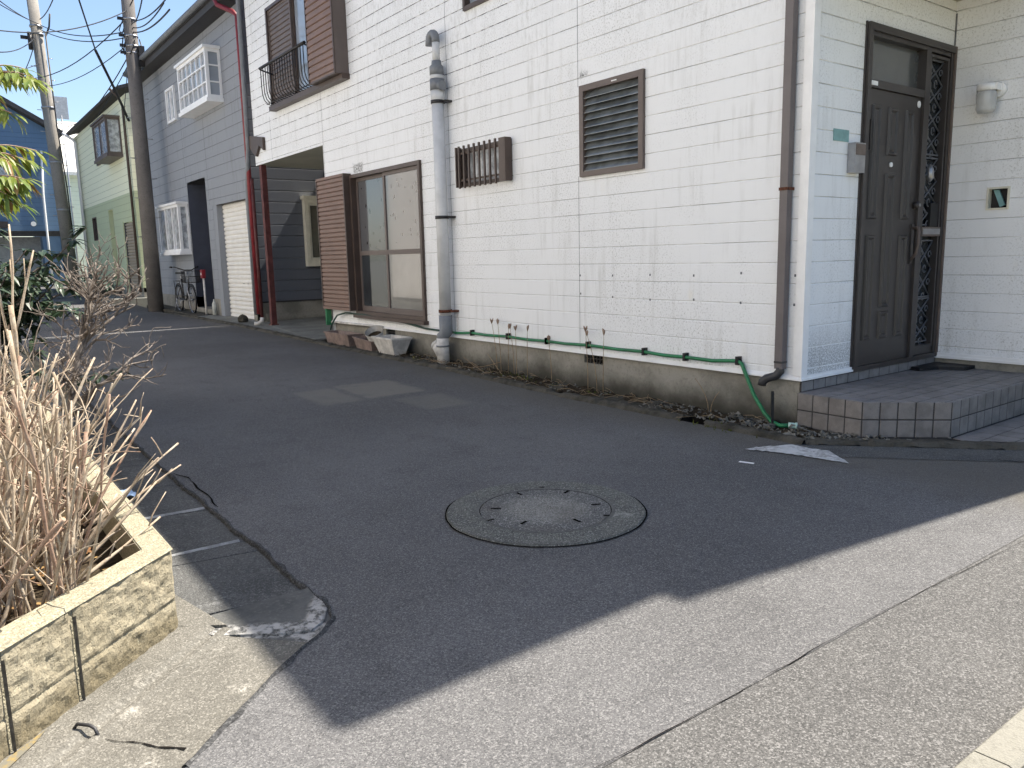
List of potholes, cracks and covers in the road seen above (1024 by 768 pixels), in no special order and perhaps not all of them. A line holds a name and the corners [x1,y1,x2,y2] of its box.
crack [108,739,187,750]
manhole cover [445,481,648,547]
crack [173,473,218,507]
